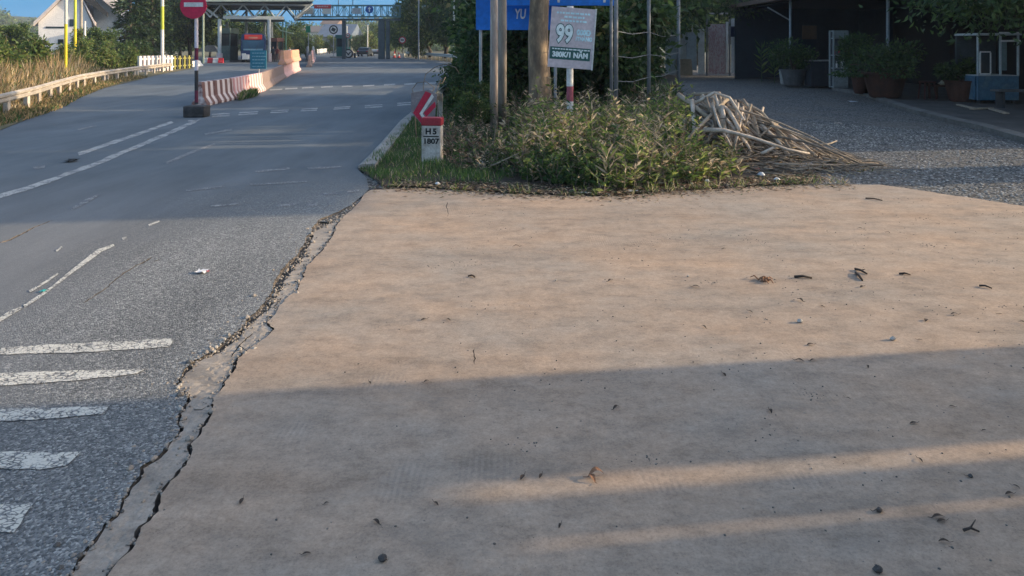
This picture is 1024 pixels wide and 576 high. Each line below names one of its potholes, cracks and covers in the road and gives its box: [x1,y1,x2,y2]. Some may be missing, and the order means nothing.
crack [69,203,354,576]
